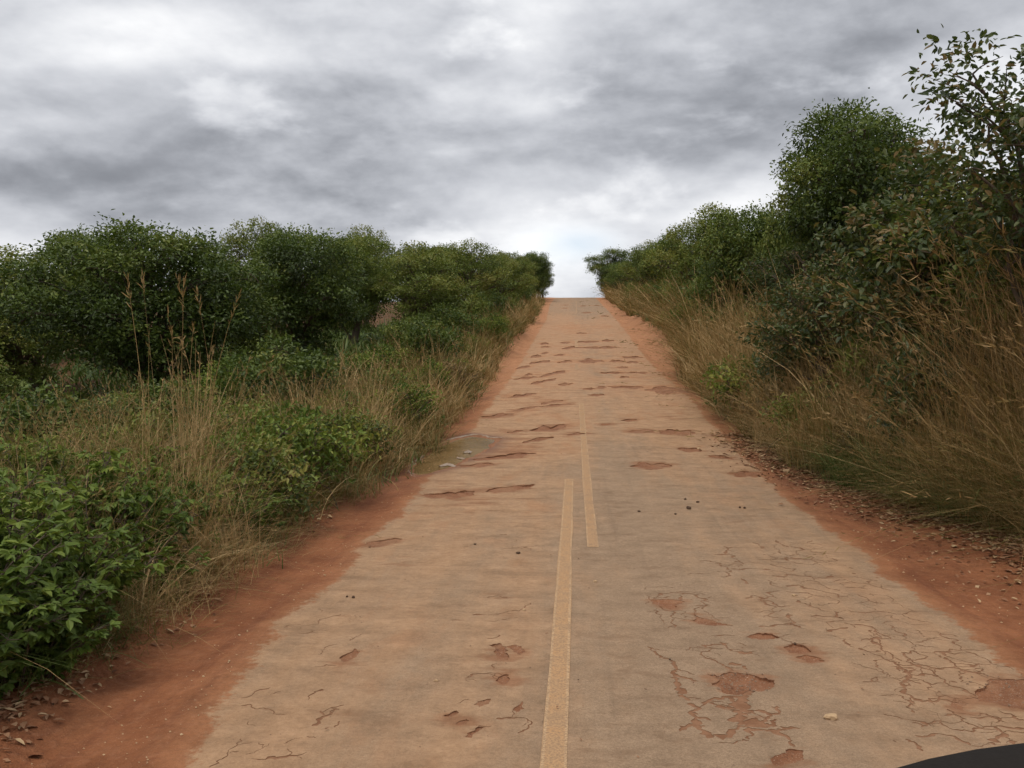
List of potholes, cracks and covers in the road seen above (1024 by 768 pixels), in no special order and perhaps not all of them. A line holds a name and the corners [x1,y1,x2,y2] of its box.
pothole [646,386,692,395]
pothole [710,672,775,695]
pothole [486,484,535,493]
pothole [796,655,824,663]
crack [645,540,1024,751]
pothole [651,599,684,610]
pothole [631,462,672,470]
pothole [340,649,360,662]
pothole [490,643,509,660]
pothole [770,749,804,766]
crack [210,688,343,767]
pothole [974,679,1024,710]
